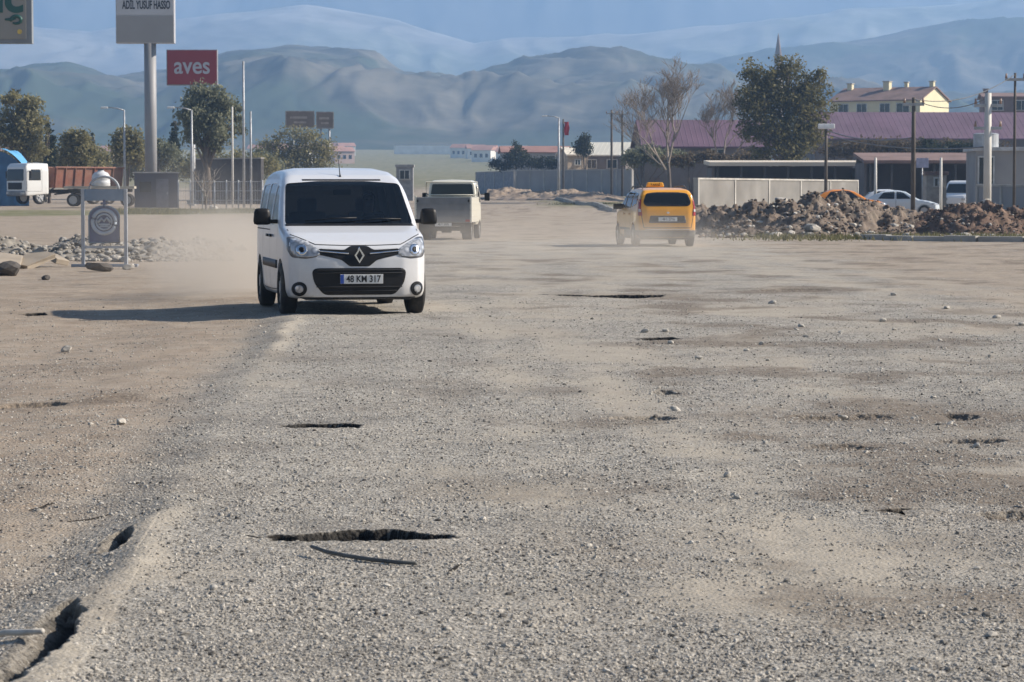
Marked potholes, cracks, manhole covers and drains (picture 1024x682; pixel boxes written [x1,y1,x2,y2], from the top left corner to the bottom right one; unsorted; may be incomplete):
pothole [0,564,140,682]
crack [29,502,110,522]
